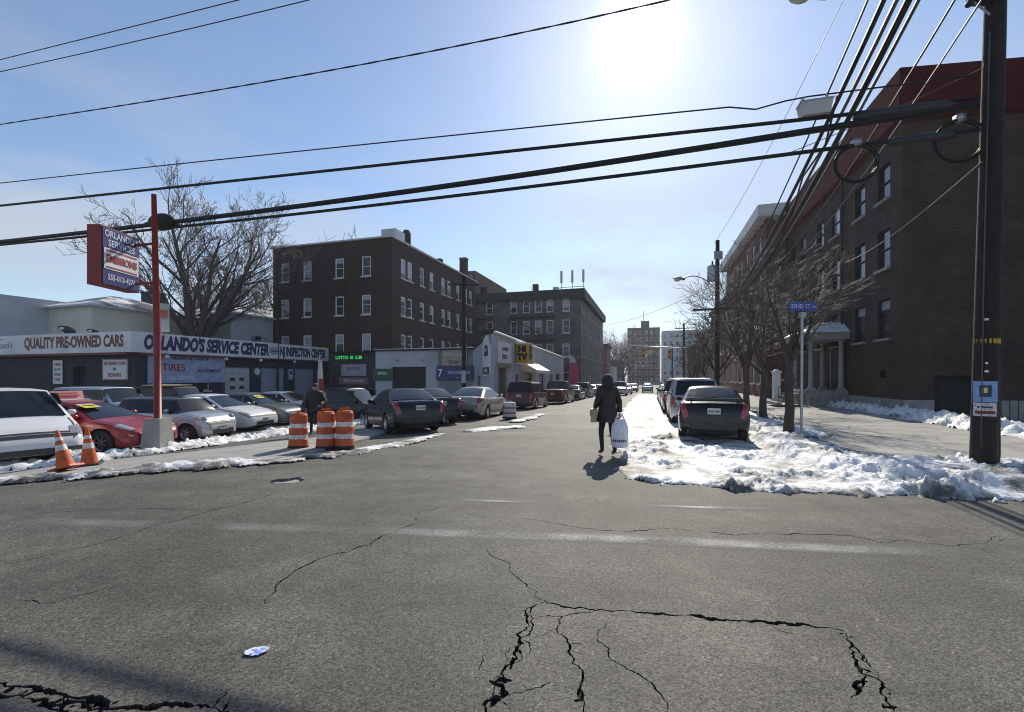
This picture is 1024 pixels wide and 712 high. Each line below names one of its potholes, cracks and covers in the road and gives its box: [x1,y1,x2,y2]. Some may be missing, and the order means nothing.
crack [264,507,438,604]
crack [0,682,230,712]
crack [479,548,898,712]
